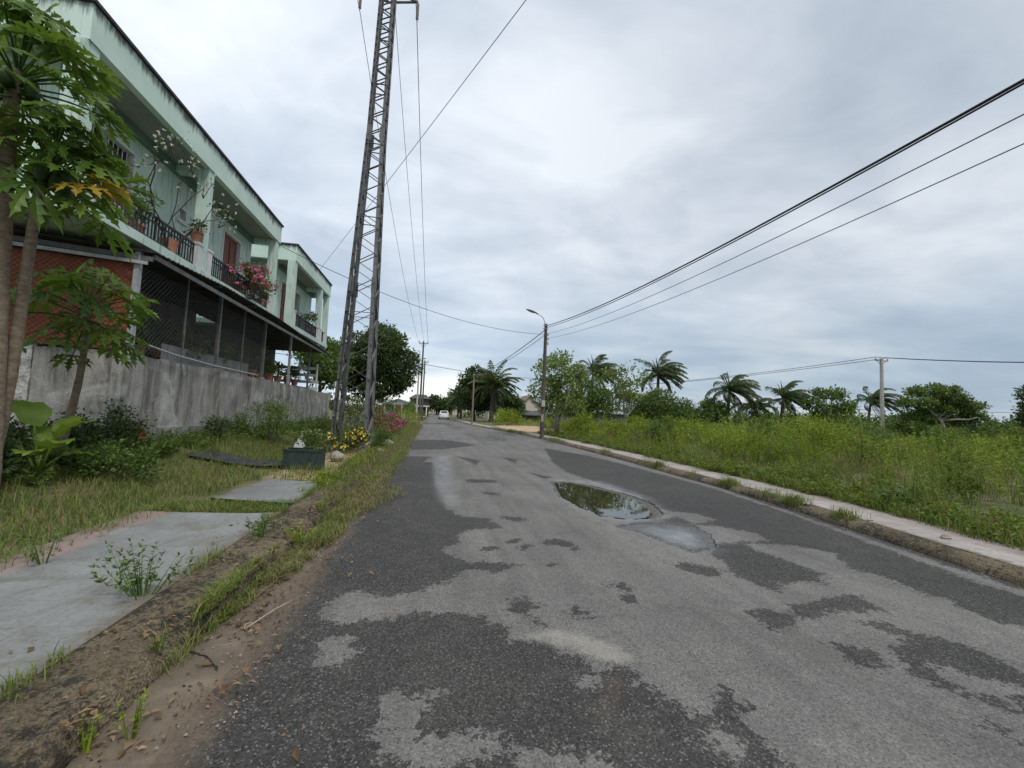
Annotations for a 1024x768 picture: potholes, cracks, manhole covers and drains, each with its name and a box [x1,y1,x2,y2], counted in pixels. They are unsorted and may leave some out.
pothole [550,481,663,520]
